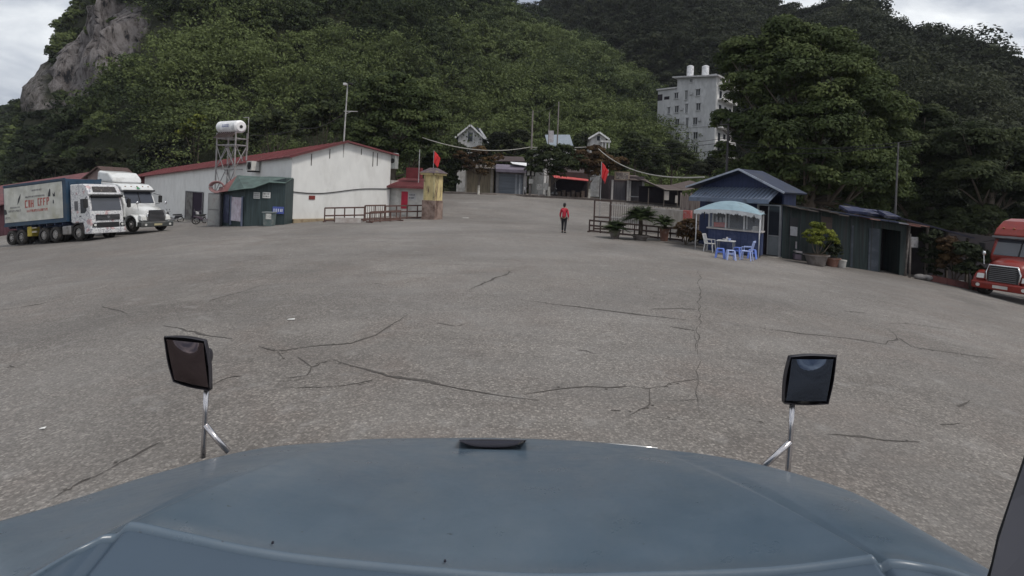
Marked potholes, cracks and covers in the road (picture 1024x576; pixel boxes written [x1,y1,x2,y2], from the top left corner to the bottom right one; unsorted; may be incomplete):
crack [163,325,232,339]
crack [53,442,159,498]
crack [260,313,694,420]
crack [751,323,995,359]
crack [835,434,920,442]
crack [521,299,694,331]
